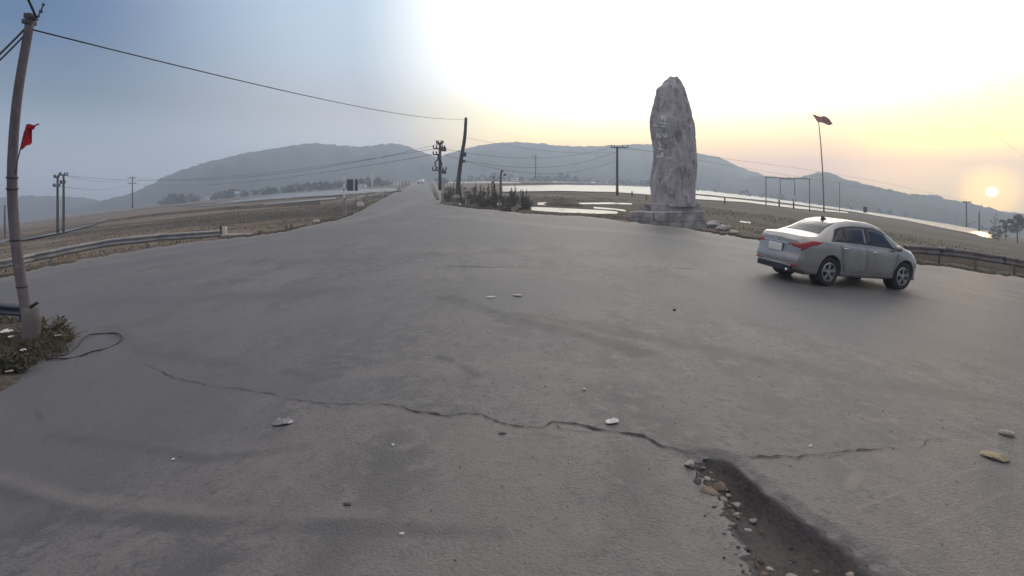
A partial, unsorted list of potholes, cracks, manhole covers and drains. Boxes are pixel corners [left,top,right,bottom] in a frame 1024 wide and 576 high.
pothole [692,458,881,576]
crack [148,365,694,458]
crack [755,439,950,458]
